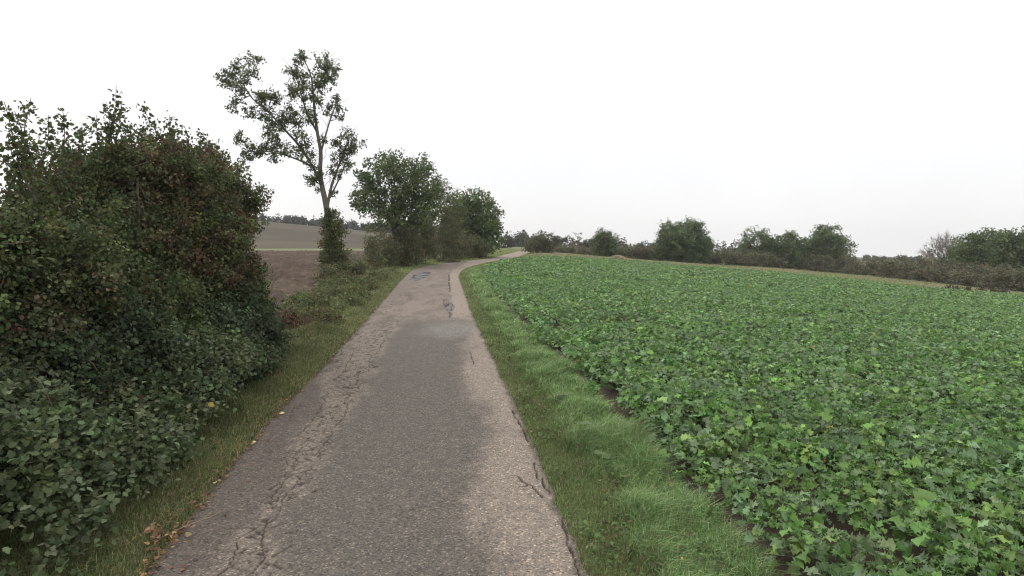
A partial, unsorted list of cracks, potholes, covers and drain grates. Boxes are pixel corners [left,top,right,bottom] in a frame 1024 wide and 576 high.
crack [443,281,453,318]
crack [560,518,581,576]
crack [516,462,552,498]
pothole [410,272,431,281]
crack [210,292,412,576]
